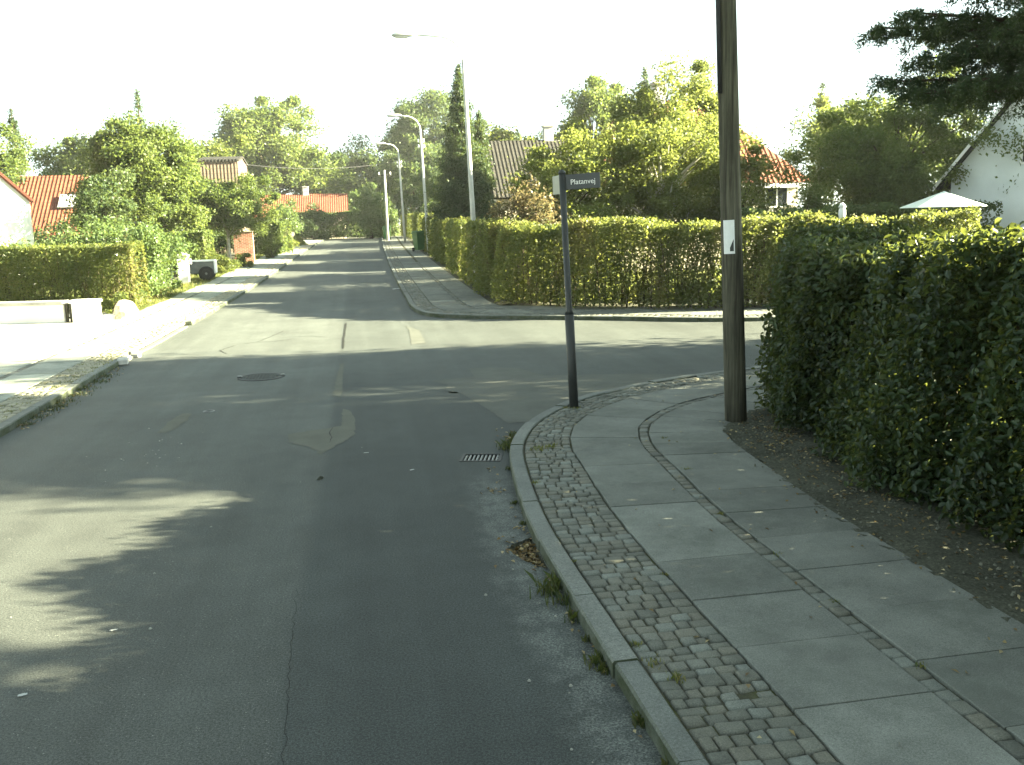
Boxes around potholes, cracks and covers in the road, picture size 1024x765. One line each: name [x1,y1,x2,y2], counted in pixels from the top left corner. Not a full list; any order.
manhole cover [237,373,285,381]
drain grate [459,453,503,462]
